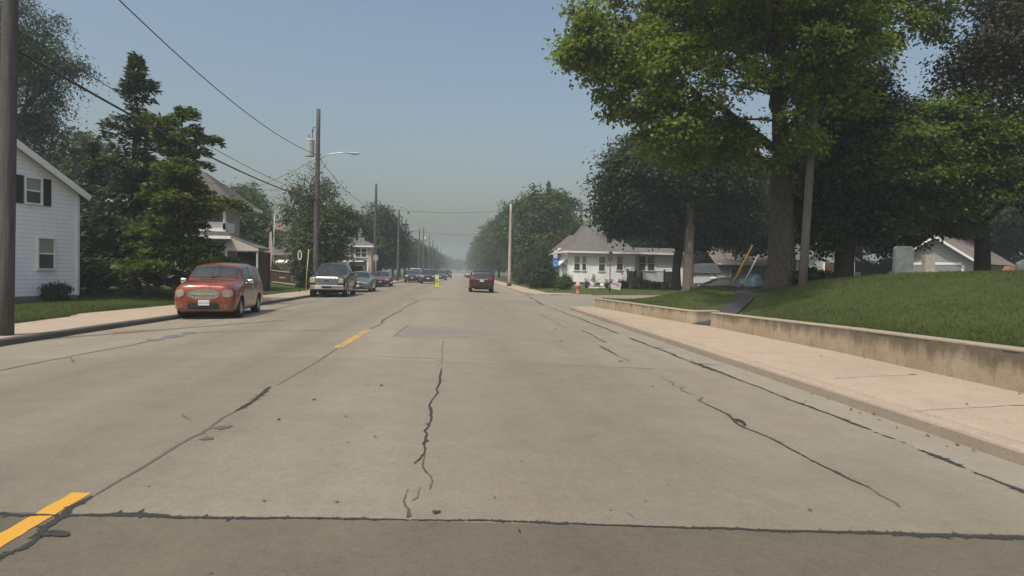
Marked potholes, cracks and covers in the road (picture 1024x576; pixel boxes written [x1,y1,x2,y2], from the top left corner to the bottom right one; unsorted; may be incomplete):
crack [0,341,1024,540]
